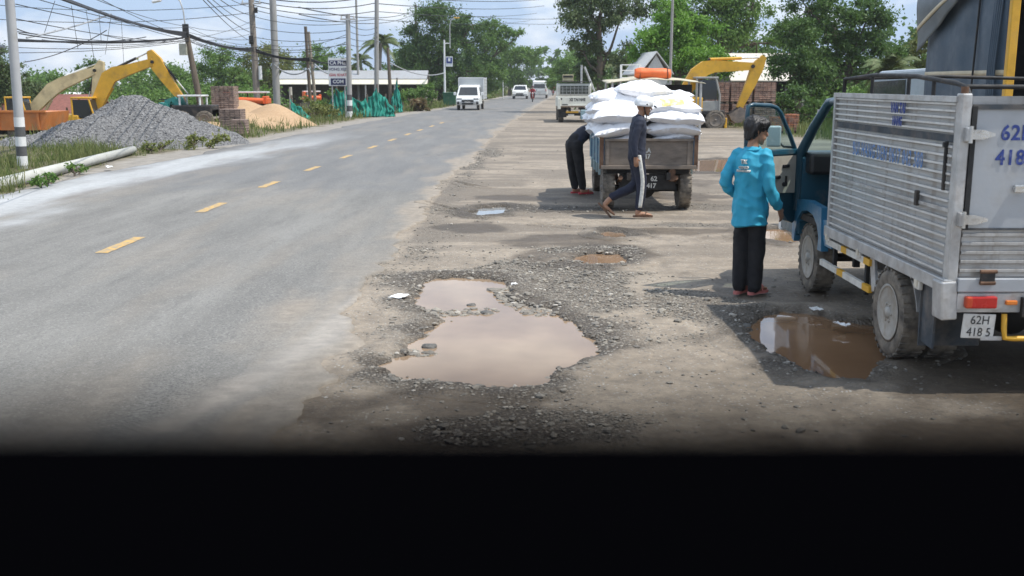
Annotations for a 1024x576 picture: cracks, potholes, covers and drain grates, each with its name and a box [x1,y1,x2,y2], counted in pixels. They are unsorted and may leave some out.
pothole [536,247,666,270]
pothole [577,226,654,241]
pothole [321,269,654,395]
pothole [706,301,968,394]
pothole [448,202,533,219]
